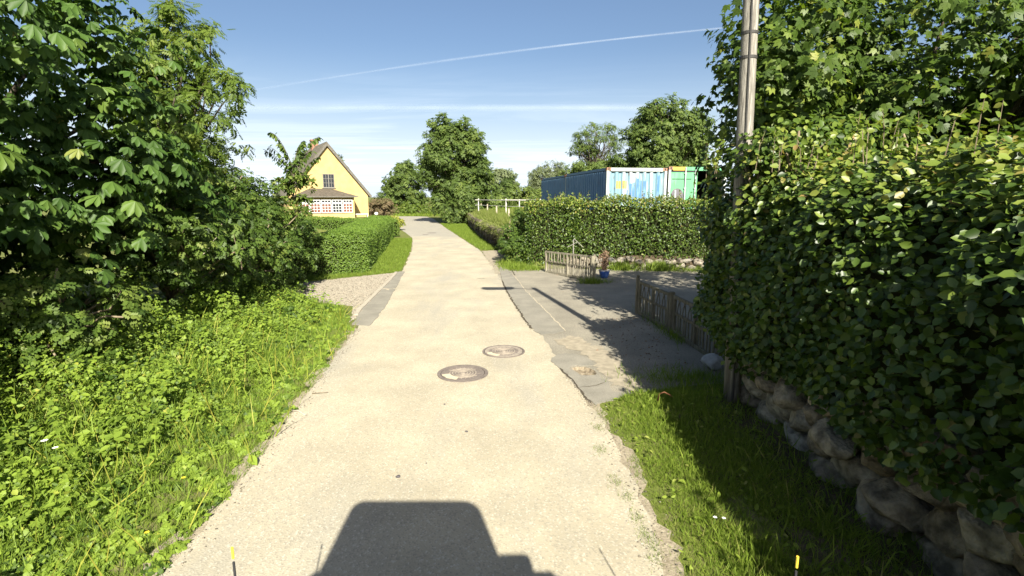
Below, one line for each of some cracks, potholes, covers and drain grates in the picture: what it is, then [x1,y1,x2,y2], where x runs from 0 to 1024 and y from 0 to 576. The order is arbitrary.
manhole cover [437,365,488,382]
manhole cover [482,345,525,358]
pothole [572,367,596,375]
